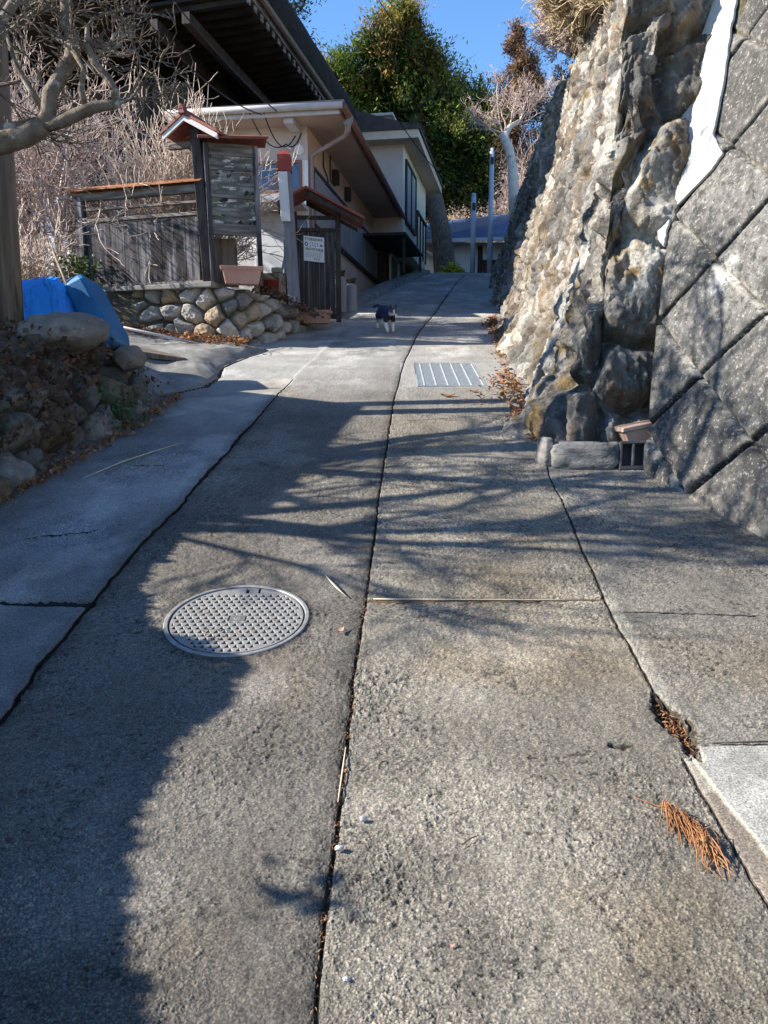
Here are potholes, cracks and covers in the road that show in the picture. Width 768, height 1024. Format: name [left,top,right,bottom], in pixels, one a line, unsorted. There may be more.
manhole cover [163,585,310,657]
crack [0,351,294,726]
drain grate [414,363,487,387]
